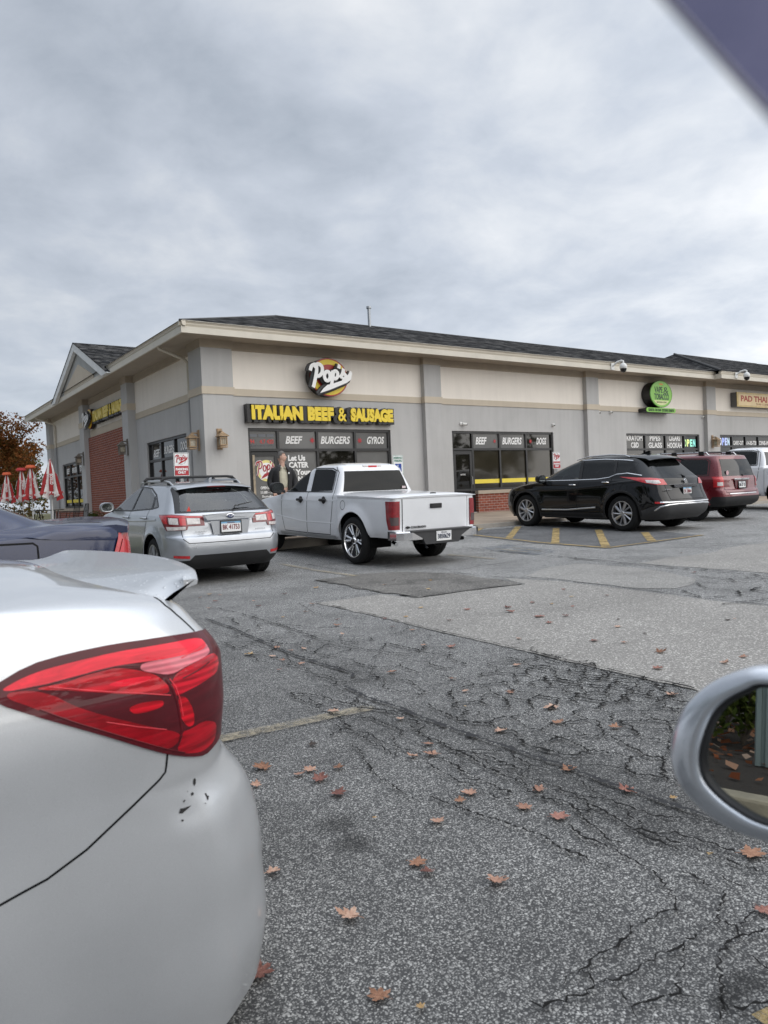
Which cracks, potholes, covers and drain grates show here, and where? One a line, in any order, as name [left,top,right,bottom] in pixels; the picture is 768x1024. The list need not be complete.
crack [207,601,768,1020]
crack [683,576,768,604]
